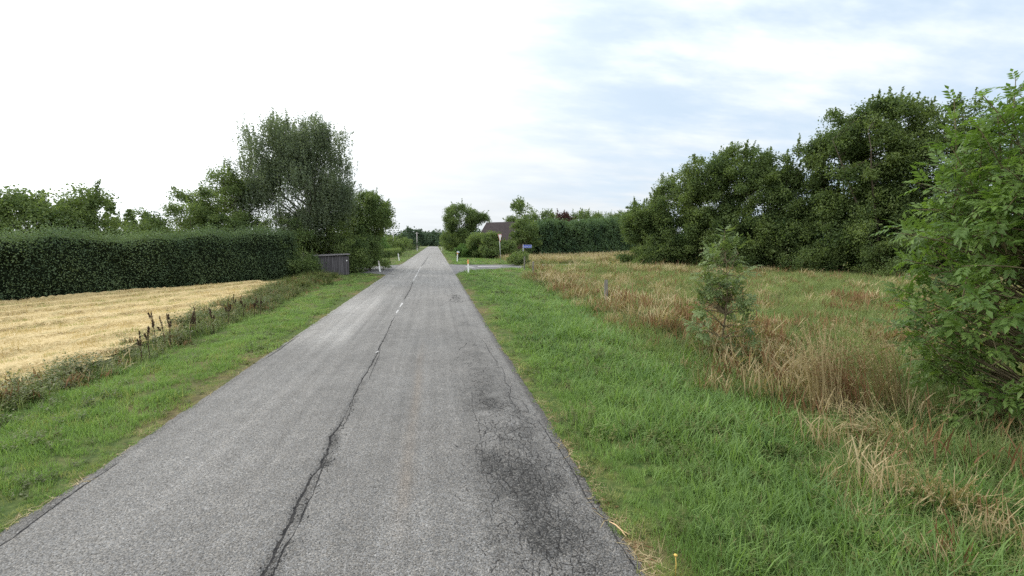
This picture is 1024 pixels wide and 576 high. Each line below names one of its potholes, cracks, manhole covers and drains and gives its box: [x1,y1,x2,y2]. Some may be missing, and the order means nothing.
crack [446,335,641,576]
crack [260,317,395,576]
